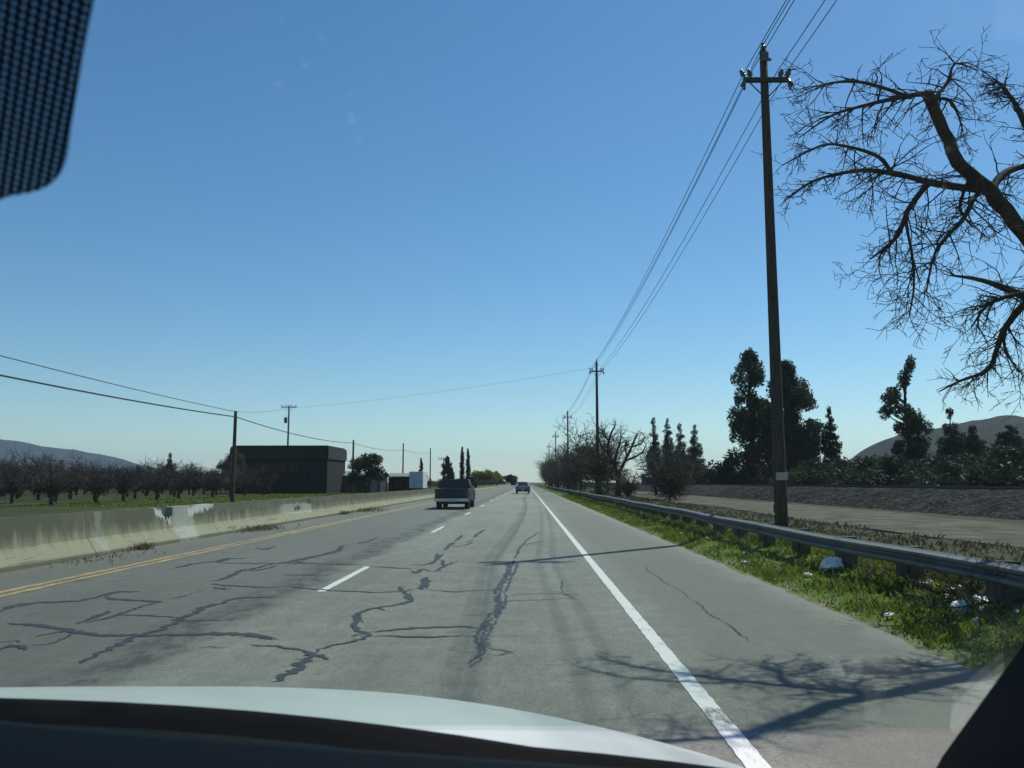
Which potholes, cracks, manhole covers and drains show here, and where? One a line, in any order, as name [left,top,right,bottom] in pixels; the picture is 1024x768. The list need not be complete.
crack [647,569,748,640]
